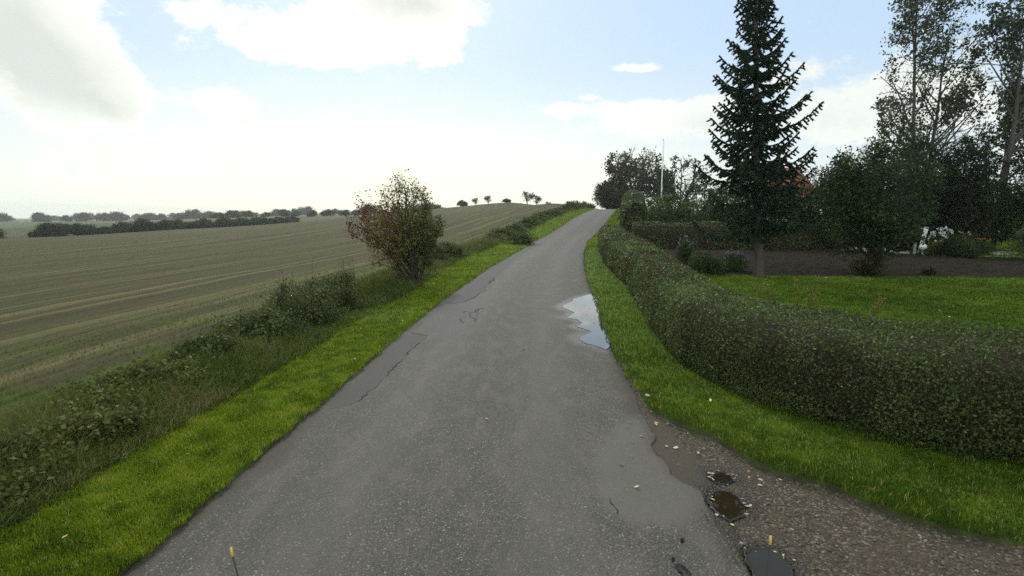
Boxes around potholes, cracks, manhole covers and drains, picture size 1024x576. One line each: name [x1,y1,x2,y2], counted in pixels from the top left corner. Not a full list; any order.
pothole [743,546,794,576]
crack [346,332,428,405]
crack [444,278,494,323]
pothole [710,471,735,486]
pothole [675,563,691,576]
pothole [707,489,746,523]
